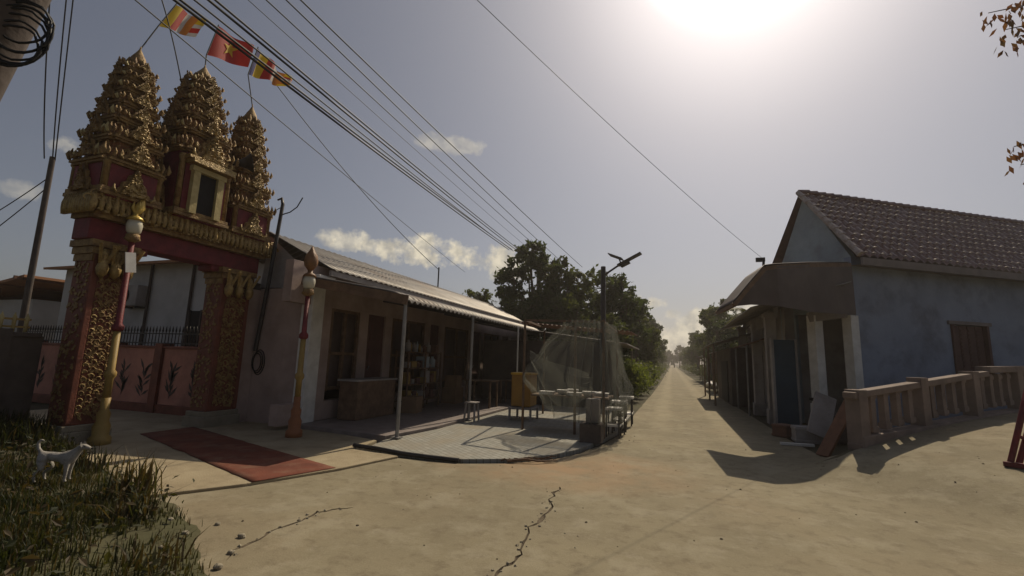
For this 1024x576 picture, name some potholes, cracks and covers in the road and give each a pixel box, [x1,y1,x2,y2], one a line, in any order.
crack [487,487,561,576]
crack [226,507,352,561]
